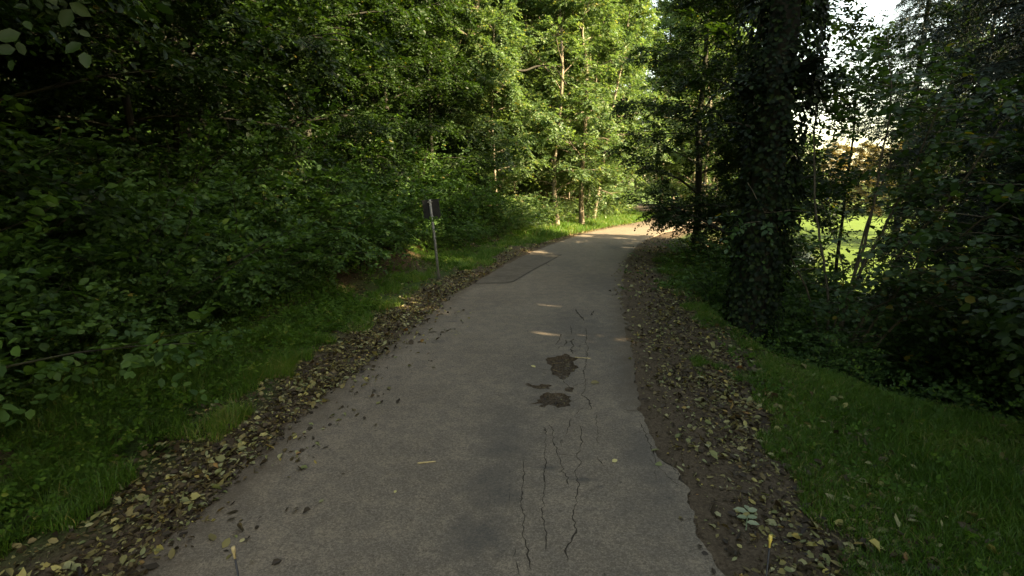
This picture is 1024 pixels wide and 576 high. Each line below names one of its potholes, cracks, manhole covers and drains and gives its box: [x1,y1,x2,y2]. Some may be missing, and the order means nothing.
pothole [532,392,571,408]
pothole [546,354,578,380]
crack [495,310,607,573]
